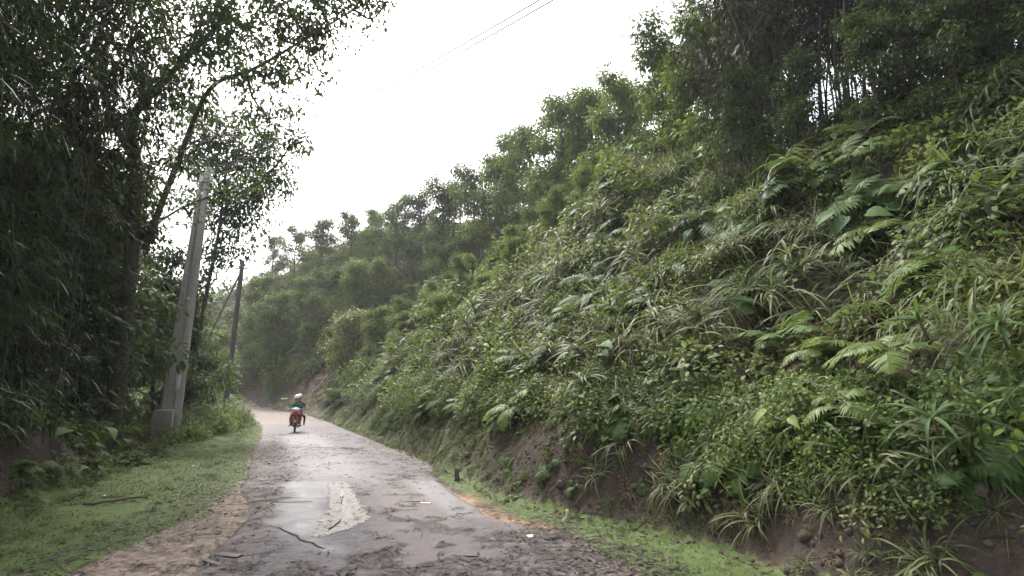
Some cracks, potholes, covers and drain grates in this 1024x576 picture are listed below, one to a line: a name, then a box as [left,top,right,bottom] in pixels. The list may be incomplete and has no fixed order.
crack [278,527,324,549]
